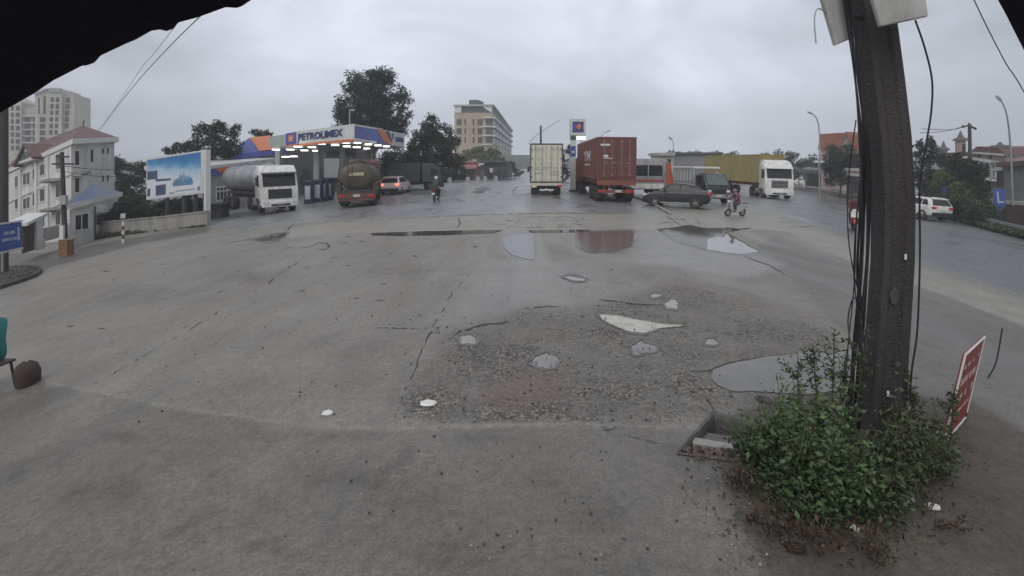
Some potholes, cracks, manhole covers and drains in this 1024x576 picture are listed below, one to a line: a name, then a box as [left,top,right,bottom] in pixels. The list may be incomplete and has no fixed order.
pothole [524,349,563,371]
pothole [662,296,682,311]
pothole [456,331,480,346]
crack [376,281,559,418]
pothole [595,312,688,335]
pothole [628,337,660,357]
